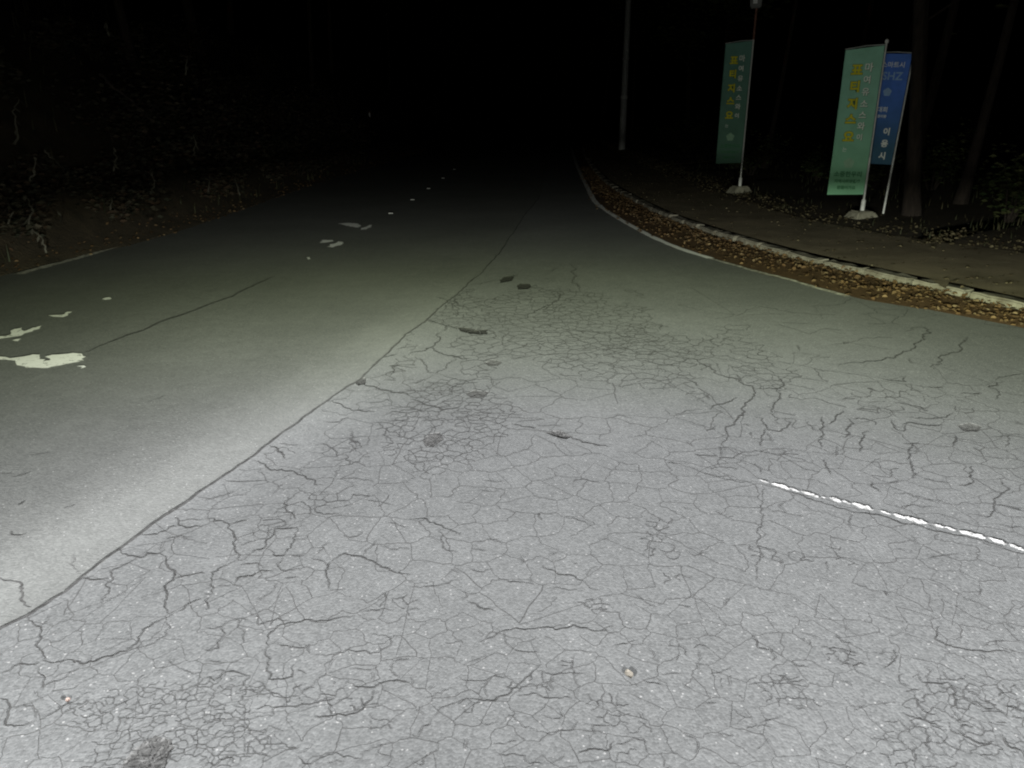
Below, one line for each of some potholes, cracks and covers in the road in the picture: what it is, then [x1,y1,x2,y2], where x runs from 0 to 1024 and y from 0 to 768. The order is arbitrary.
pothole [423,432,444,447]
pothole [546,430,571,439]
pothole [956,422,982,432]
pothole [121,735,174,768]
crack [0,269,1024,768]
